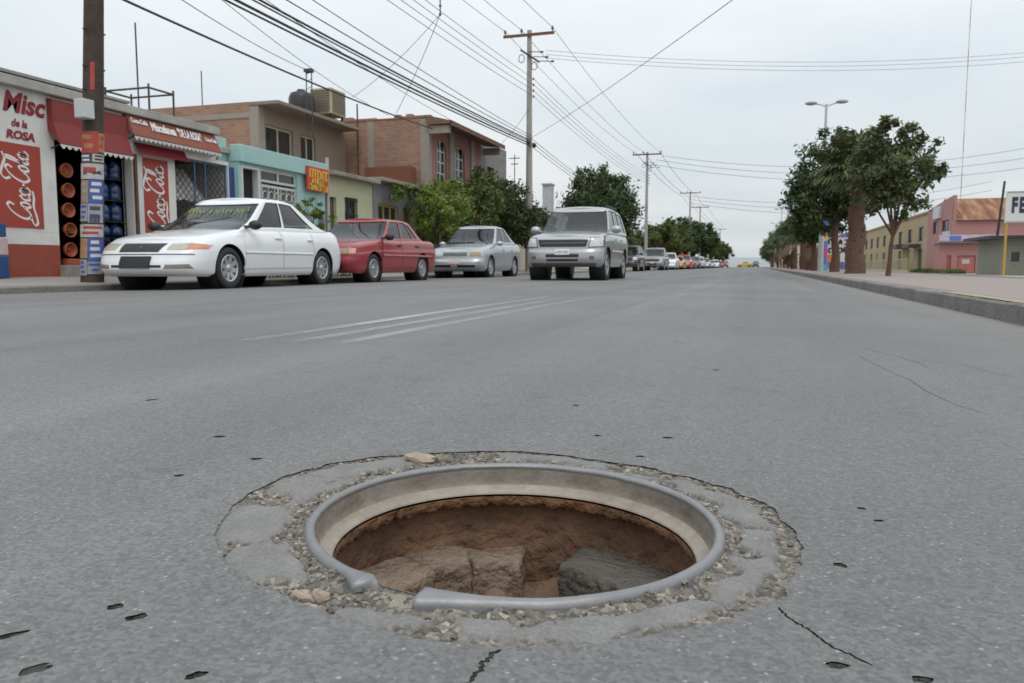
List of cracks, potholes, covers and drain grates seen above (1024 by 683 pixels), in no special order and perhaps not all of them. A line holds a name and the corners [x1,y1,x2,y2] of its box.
crack [778,609,872,666]
crack [468,651,500,683]
